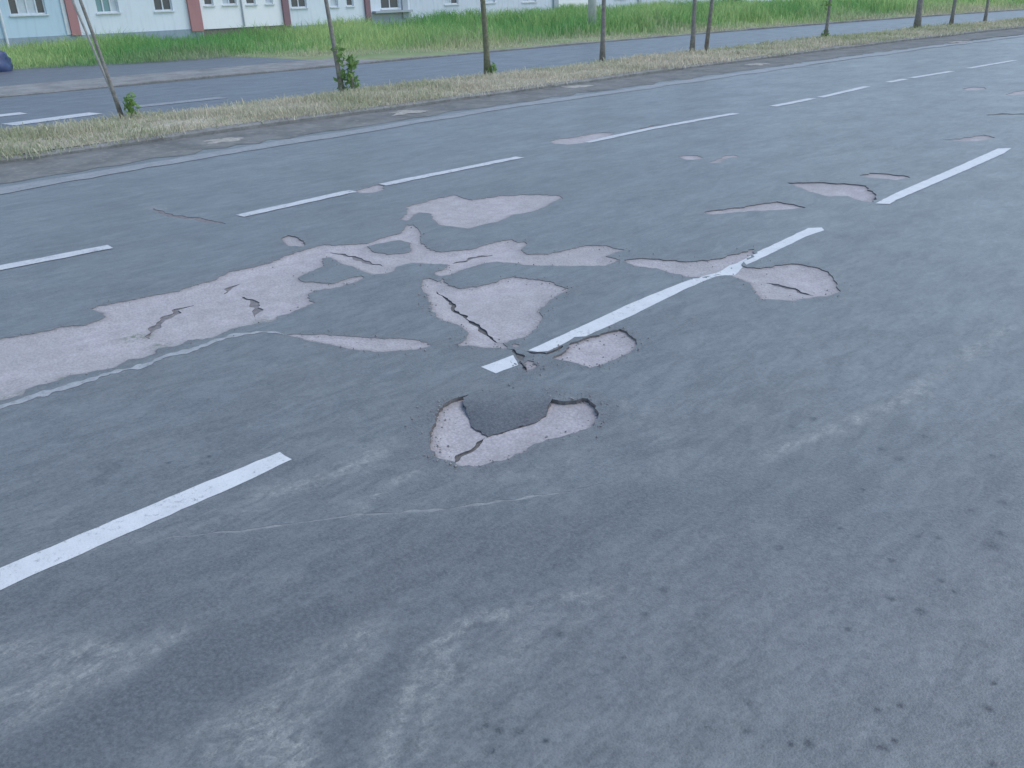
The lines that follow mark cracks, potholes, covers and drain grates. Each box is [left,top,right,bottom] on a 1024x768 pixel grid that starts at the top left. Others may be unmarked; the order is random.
crack [153,208,226,224]
pothole [553,329,637,368]
pothole [551,133,614,145]
pothole [429,386,599,466]
pothole [789,182,877,202]
pothole [705,201,806,214]
pothole [401,194,562,229]
pothole [625,249,841,301]
pothole [0,225,624,400]
